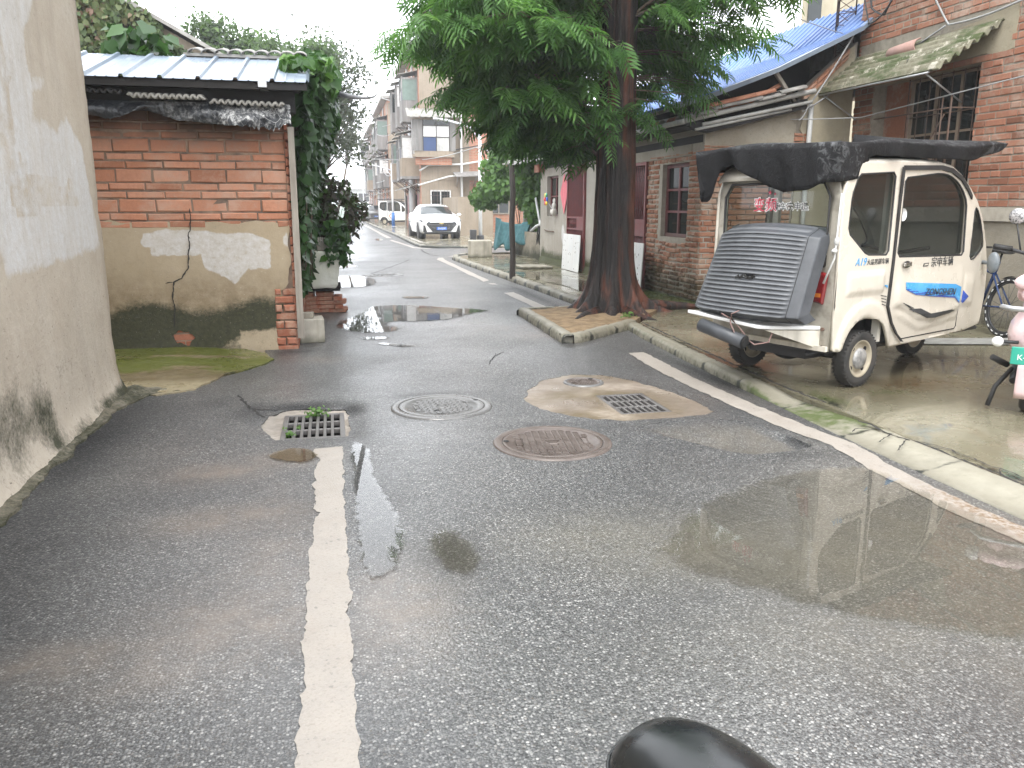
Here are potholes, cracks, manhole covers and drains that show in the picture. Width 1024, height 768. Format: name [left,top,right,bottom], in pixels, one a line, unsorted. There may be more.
crack [237,395,271,418]
manhole cover [563,377,604,387]
manhole cover [493,426,612,461]
drain grate [596,393,672,414]
drain grate [280,413,346,440]
manhole cover [391,394,492,420]
crack [852,420,1024,485]
